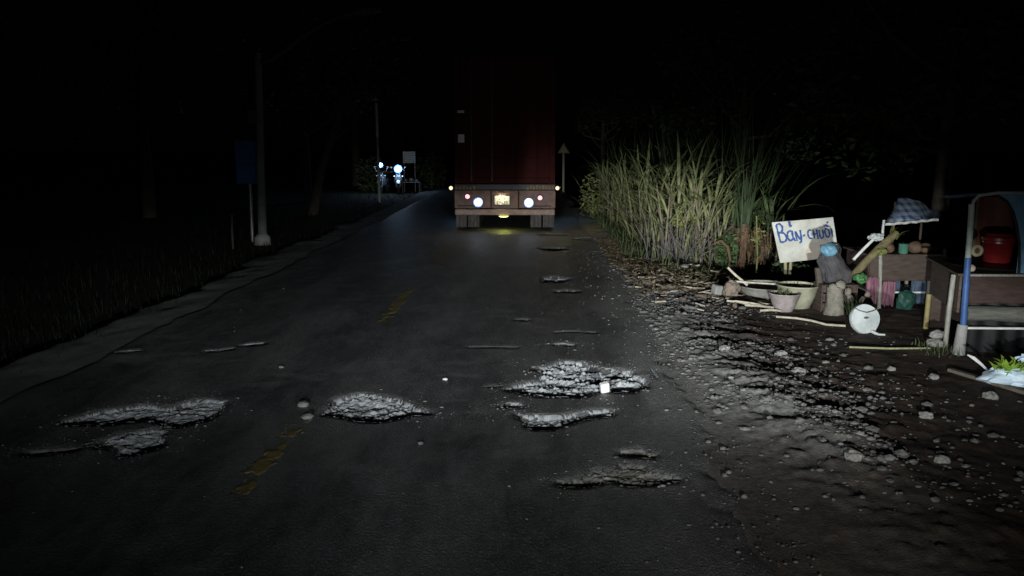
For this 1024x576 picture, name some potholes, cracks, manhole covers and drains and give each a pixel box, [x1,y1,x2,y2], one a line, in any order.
pothole [618,448,659,460]
pothole [547,463,683,488]
pothole [17,447,82,457]
pothole [511,409,615,431]
pothole [91,429,169,458]
pothole [503,361,649,398]
pothole [60,398,229,428]
crack [203,342,266,352]
pothole [321,393,431,423]
